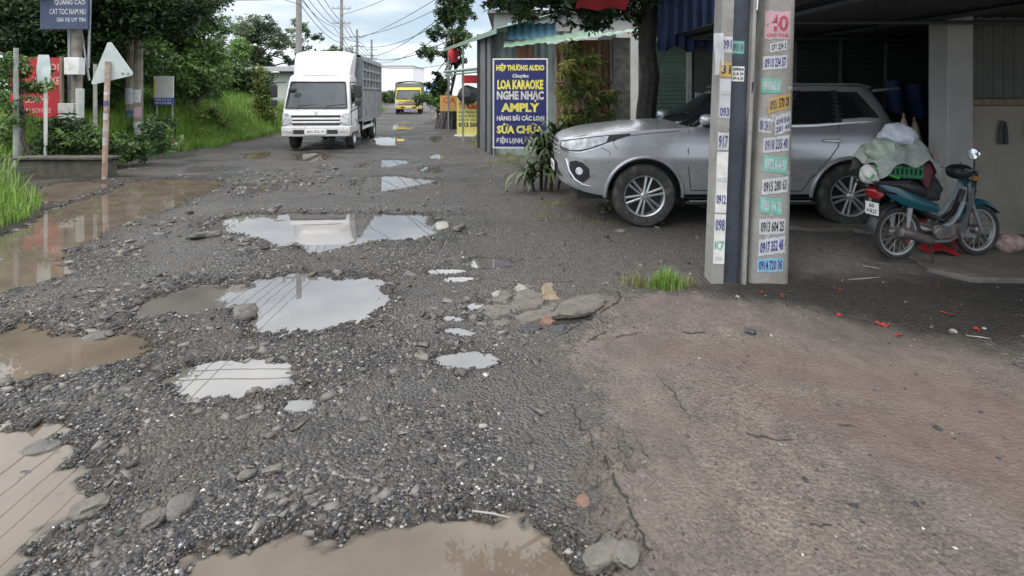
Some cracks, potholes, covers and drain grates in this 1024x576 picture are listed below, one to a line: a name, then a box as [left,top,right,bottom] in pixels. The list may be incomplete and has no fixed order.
pothole [430,347,505,371]
pothole [0,311,177,386]
pothole [355,158,412,168]
crack [572,403,655,559]
pothole [461,256,521,269]
pothole [107,267,399,340]
pothole [0,177,228,295]
pothole [157,353,310,401]
pothole [0,407,131,576]
pothole [188,209,446,255]
pothole [168,489,606,576]
pothole [370,136,408,146]
